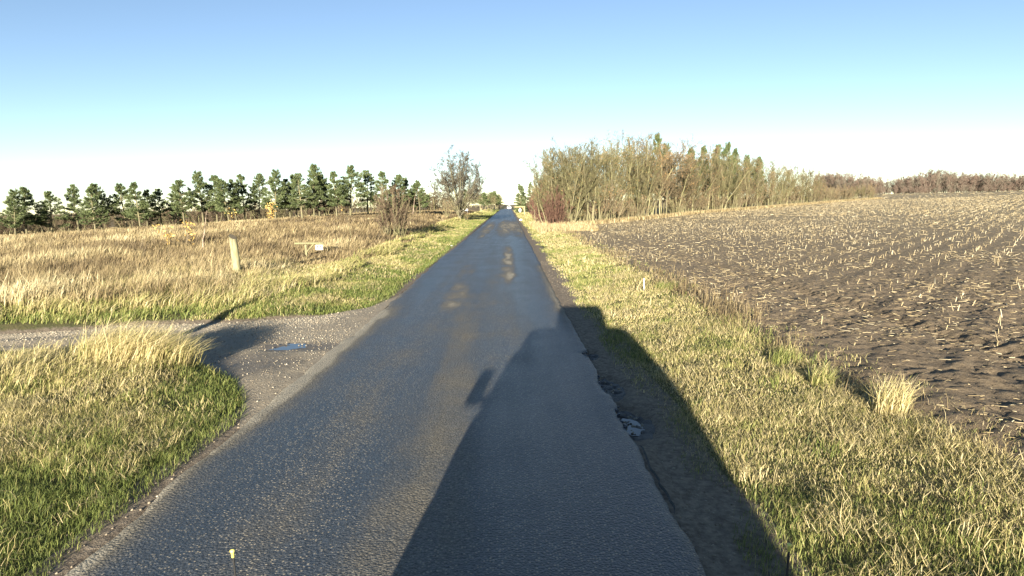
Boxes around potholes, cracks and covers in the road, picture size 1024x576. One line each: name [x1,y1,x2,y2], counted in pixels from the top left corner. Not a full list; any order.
crack [633,438,689,515]
pothole [597,375,626,402]
pothole [261,343,318,351]
pothole [615,406,655,441]
